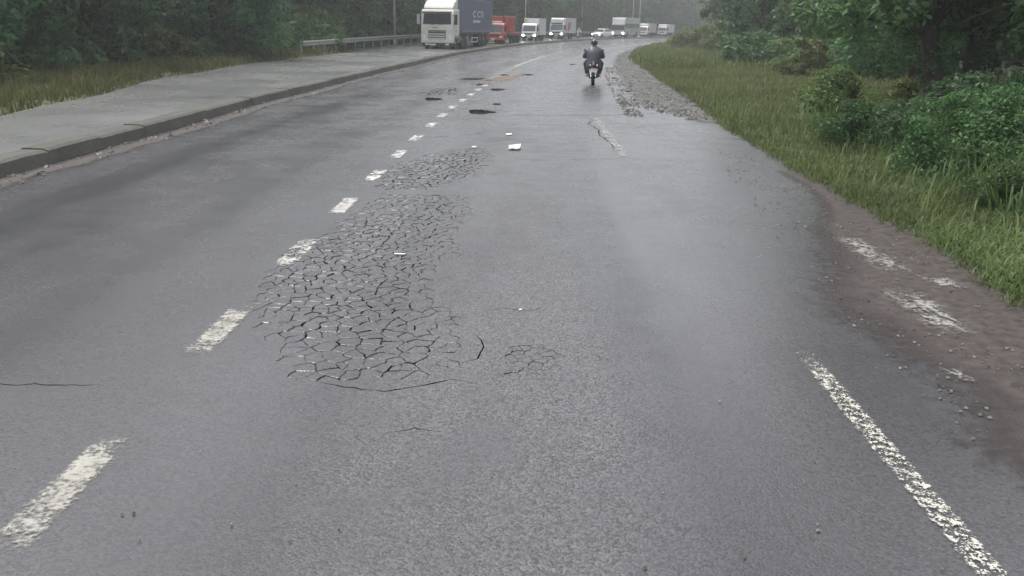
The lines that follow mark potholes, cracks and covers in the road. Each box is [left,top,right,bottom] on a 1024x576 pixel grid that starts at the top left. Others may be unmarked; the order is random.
crack [251,133,548,392]
